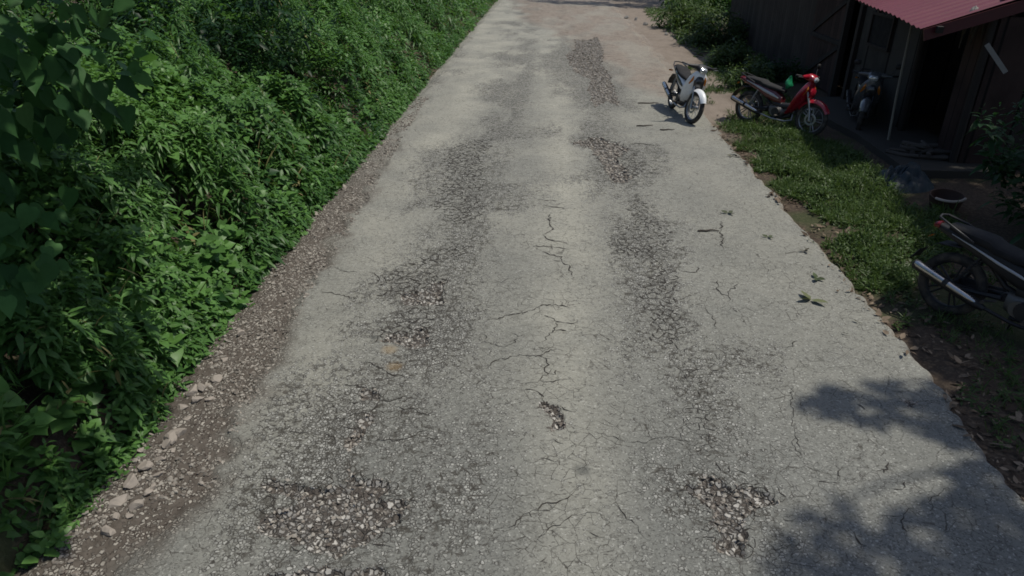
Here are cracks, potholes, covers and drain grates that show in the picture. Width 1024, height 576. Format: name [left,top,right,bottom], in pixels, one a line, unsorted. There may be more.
pothole [253,469,411,560]
pothole [538,401,566,432]
crack [323,239,475,351]
pothole [401,281,447,306]
crack [494,481,651,541]
pothole [573,137,632,183]
pothole [379,326,431,349]
crack [483,304,576,412]
pothole [686,473,780,559]
crack [546,354,722,462]
crack [536,199,573,275]
crack [608,196,796,351]
